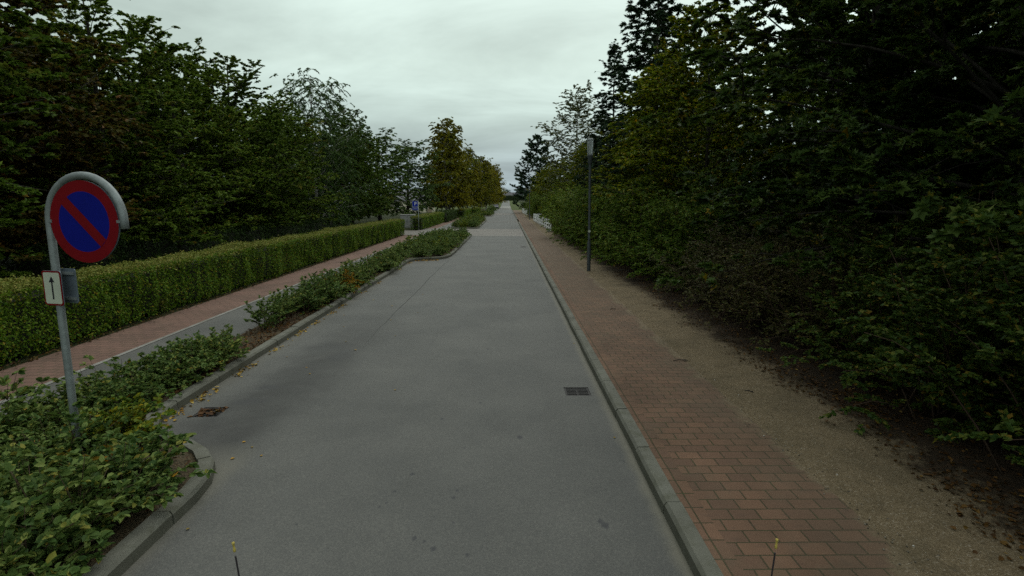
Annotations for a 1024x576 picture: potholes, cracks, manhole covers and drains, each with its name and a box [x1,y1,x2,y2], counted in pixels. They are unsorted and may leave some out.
drain grate [564,387,591,396]
drain grate [192,407,229,417]
